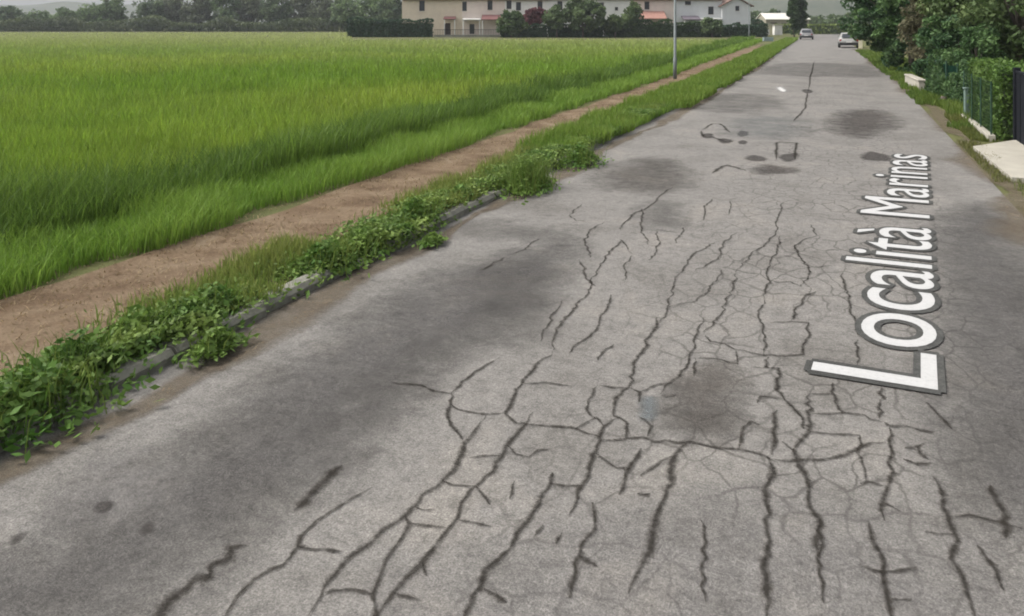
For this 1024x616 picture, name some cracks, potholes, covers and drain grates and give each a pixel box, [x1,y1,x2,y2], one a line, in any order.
crack [155,187,1021,616]
